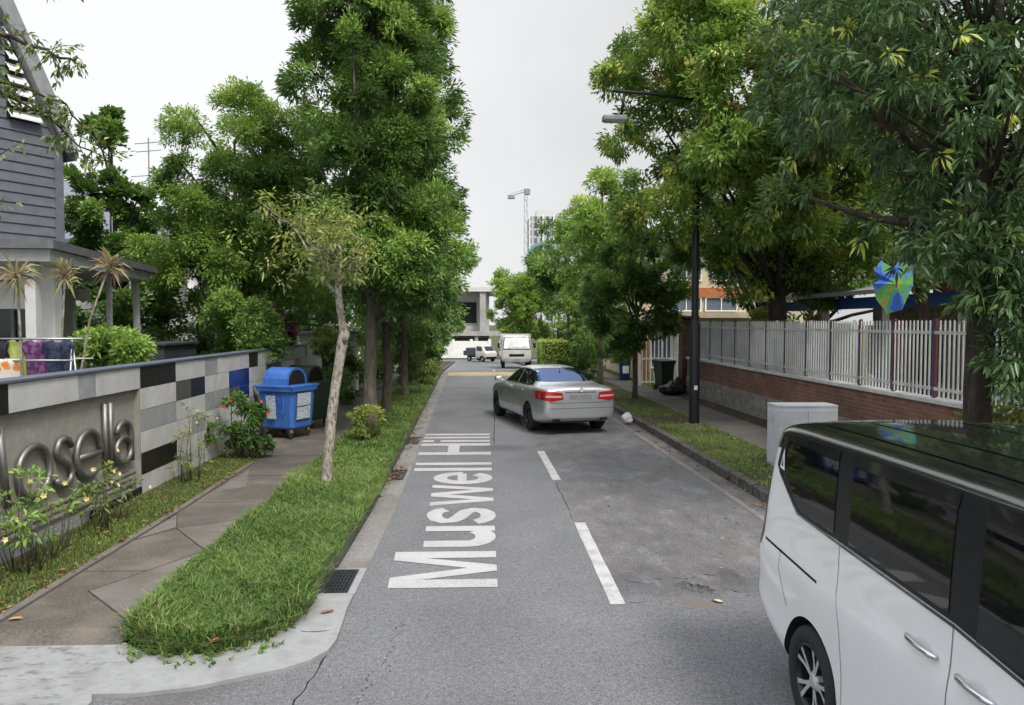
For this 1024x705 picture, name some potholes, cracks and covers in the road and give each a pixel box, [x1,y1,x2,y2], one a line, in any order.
crack [292,655,327,705]
drain grate [387,470,408,481]
pothole [674,581,716,594]
drain grate [322,569,359,593]
